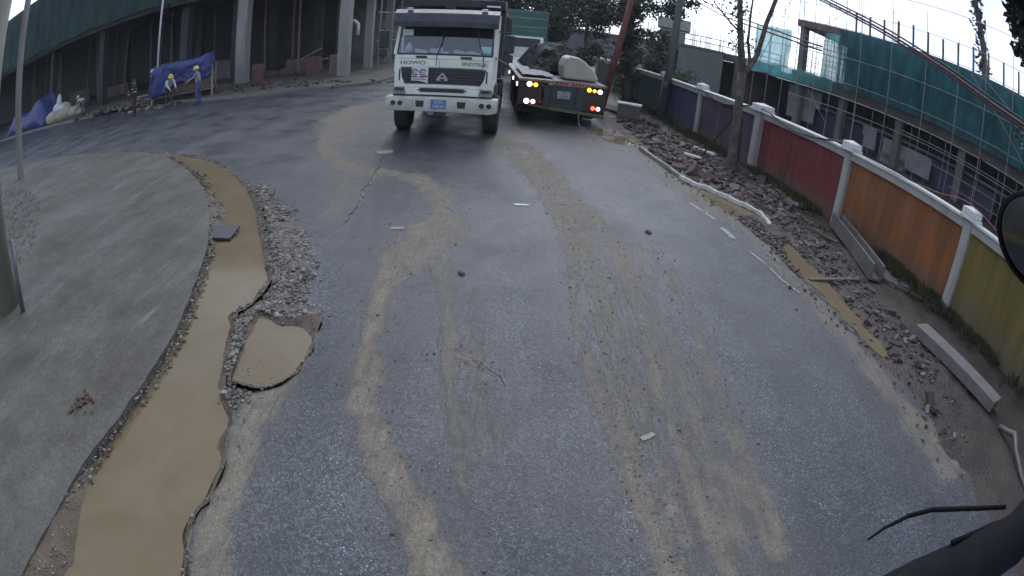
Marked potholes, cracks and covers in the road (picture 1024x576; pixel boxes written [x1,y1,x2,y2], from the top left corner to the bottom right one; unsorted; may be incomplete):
pothole [231,311,322,388]
pothole [24,151,274,576]
crack [344,158,382,224]
